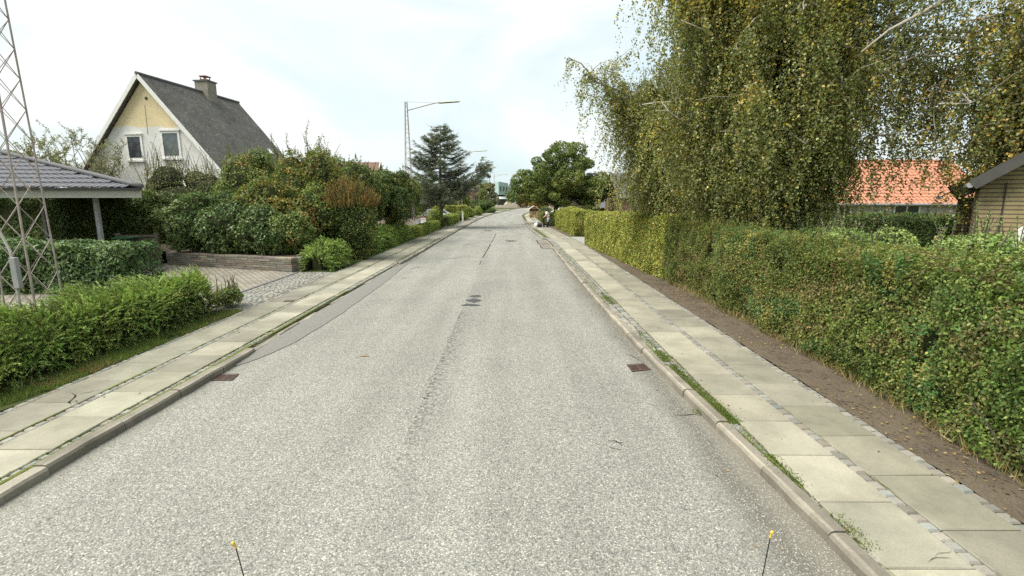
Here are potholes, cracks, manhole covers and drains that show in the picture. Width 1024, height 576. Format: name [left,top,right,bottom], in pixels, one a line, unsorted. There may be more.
drain grate [211,373,239,381]
drain grate [627,363,650,372]
